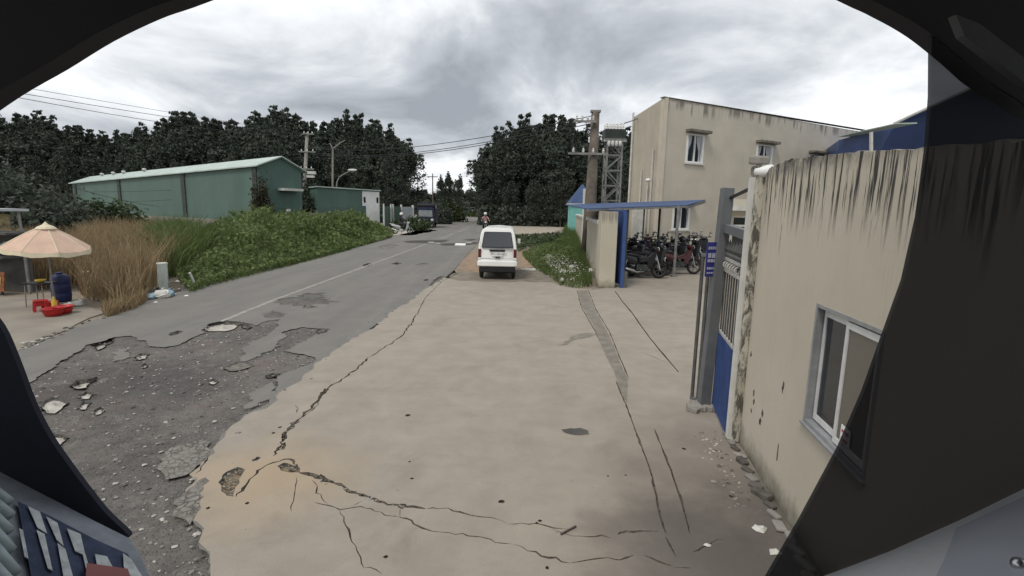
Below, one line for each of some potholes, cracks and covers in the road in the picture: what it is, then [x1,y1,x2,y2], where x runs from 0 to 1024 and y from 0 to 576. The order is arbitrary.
pothole [218,467,245,497]
pothole [204,321,241,332]
pothole [71,377,97,391]
pothole [278,463,300,473]
pothole [41,397,69,414]
crack [195,273,721,574]
pothole [88,337,115,350]
